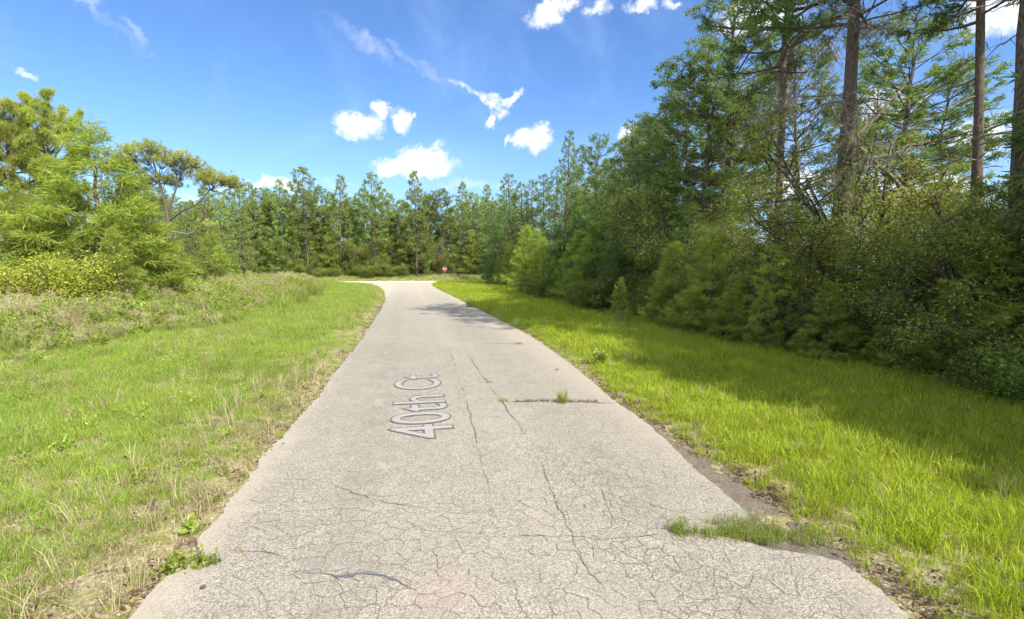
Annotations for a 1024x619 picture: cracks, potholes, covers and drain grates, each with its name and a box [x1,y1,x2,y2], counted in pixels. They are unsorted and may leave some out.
crack [206,431,512,619]
crack [472,403,894,619]
